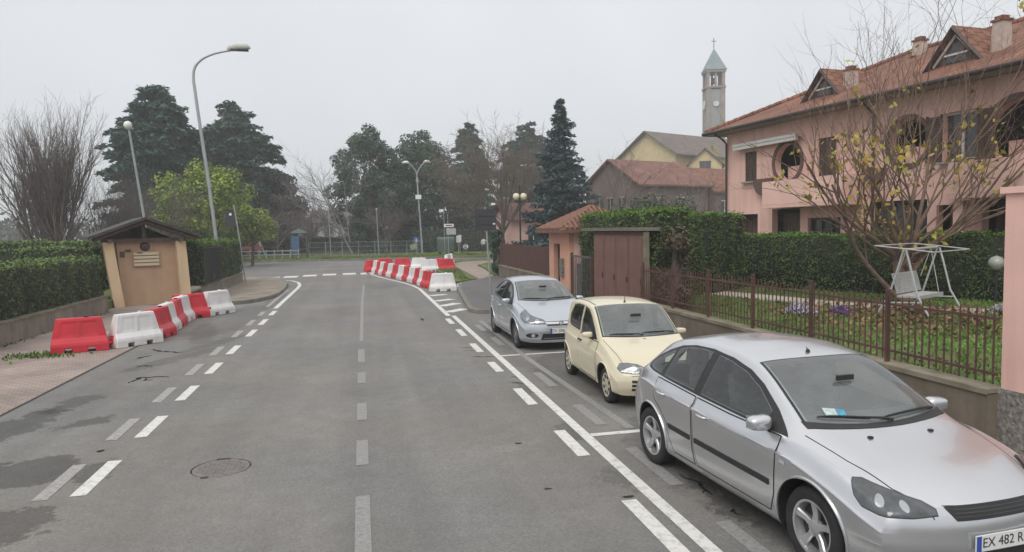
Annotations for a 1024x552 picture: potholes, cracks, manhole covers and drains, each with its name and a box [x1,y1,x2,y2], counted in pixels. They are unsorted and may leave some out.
crack [128,349,180,383]
manhole cover [187,458,254,479]
crack [680,475,713,495]
